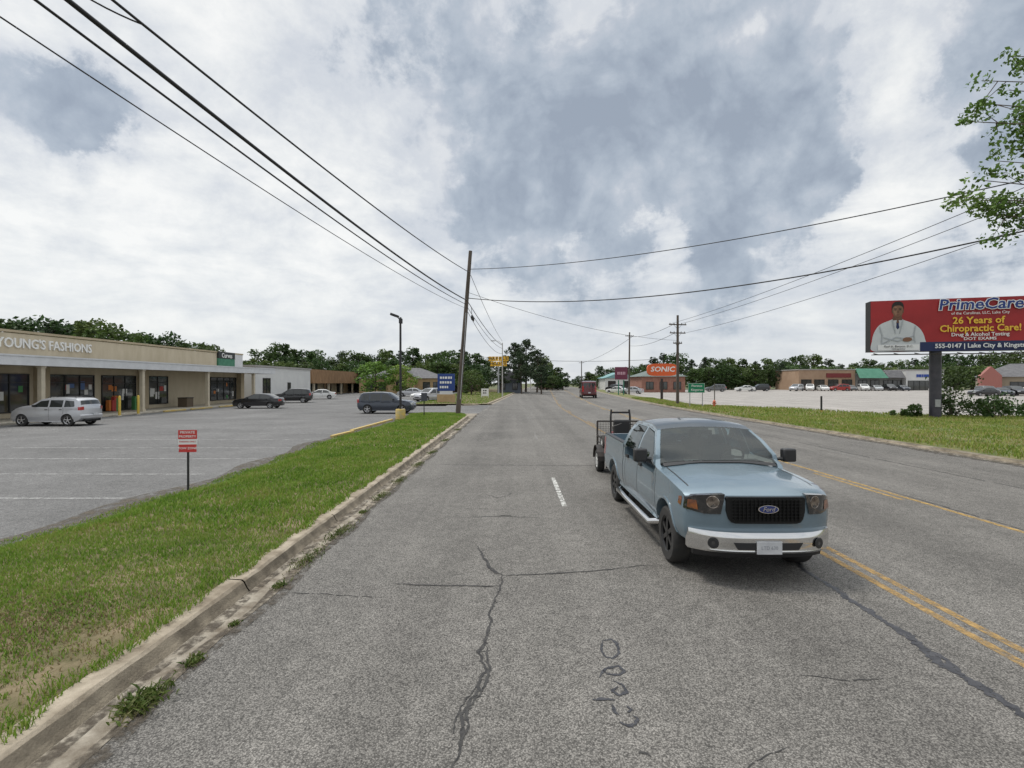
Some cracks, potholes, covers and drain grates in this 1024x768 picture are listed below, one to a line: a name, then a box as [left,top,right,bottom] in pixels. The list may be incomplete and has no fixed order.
crack [393,546,661,768]
